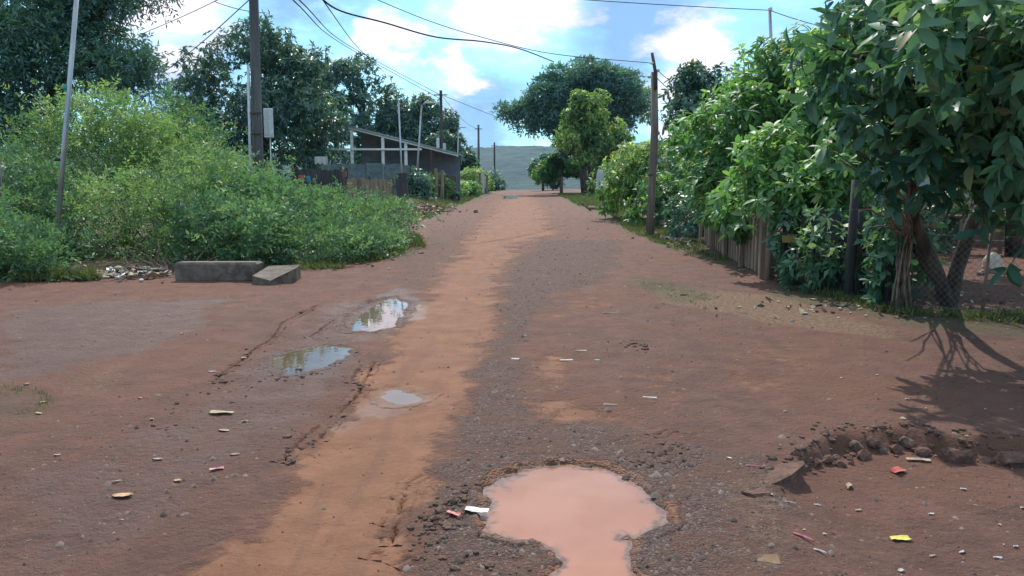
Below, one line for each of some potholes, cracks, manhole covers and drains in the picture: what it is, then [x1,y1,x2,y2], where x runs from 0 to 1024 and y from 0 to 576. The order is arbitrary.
crack [209,304,430,571]
pothole [364,382,444,409]
pothole [335,294,416,334]
pothole [462,456,687,576]
pothole [257,343,361,378]
